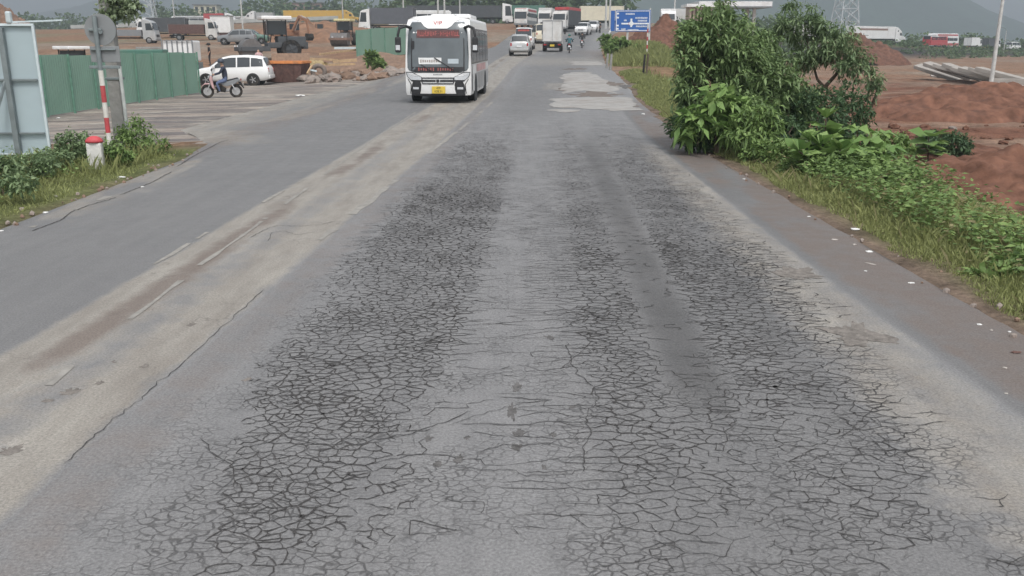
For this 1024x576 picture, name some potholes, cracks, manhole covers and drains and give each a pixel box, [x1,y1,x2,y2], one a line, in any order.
crack [193,130,1024,576]
crack [32,142,220,231]
